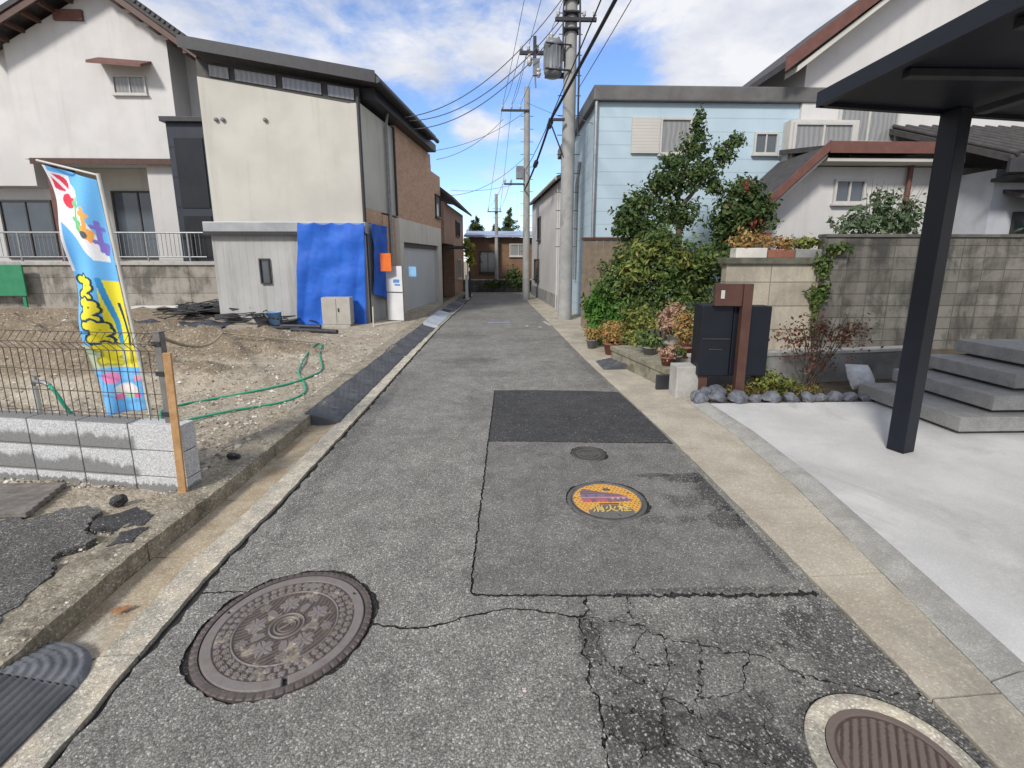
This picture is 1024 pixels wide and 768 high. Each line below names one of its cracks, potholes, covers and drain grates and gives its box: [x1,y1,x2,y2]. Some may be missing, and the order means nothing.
manhole cover [570,446,608,461]
manhole cover [179,570,380,705]
manhole cover [566,481,652,522]
manhole cover [803,692,982,768]
crack [374,390,922,768]
